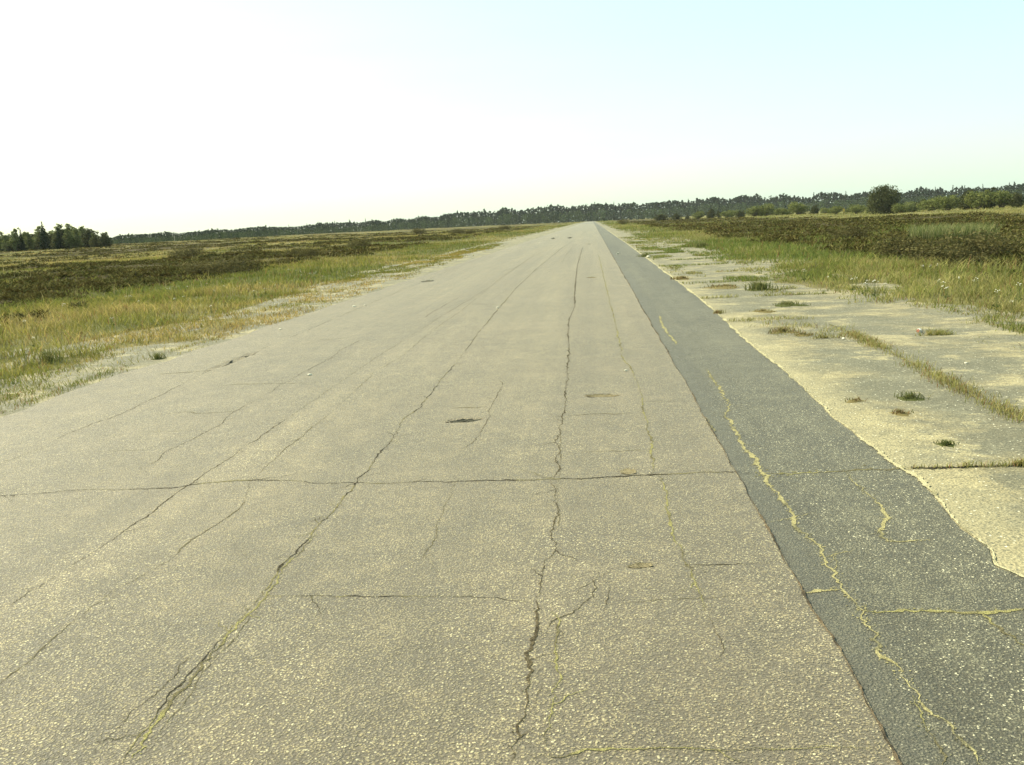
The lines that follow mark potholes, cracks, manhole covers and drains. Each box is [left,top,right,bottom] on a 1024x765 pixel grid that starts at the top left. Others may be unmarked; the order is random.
crack [3,373,373,681]
crack [86,237,578,765]
crack [976,612,1024,645]
crack [506,246,983,765]
